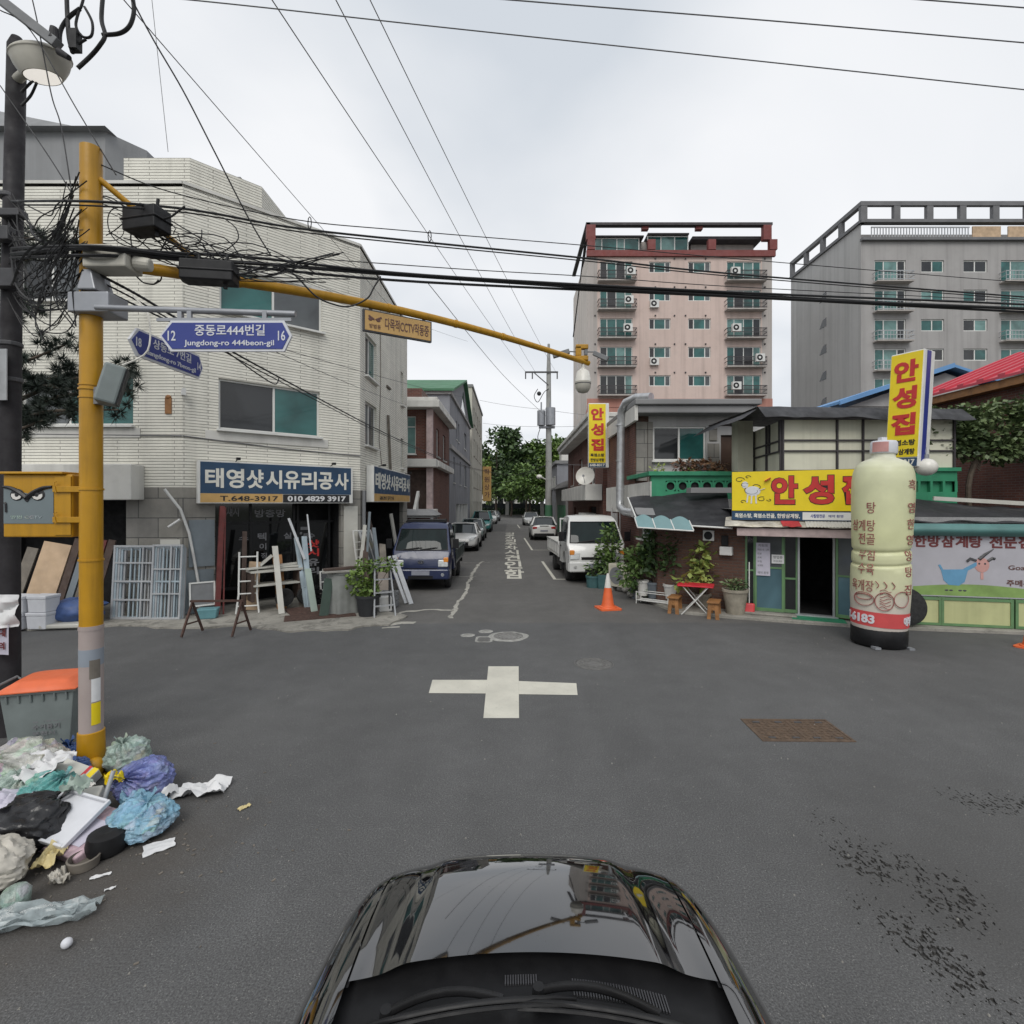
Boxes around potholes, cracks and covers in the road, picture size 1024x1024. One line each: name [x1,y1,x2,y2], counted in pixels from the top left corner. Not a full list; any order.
crack [811,810,1024,1024]
crack [935,787,1024,815]
manhole cover [741,719,856,742]
manhole cover [489,632,529,642]
manhole cover [574,658,614,670]
